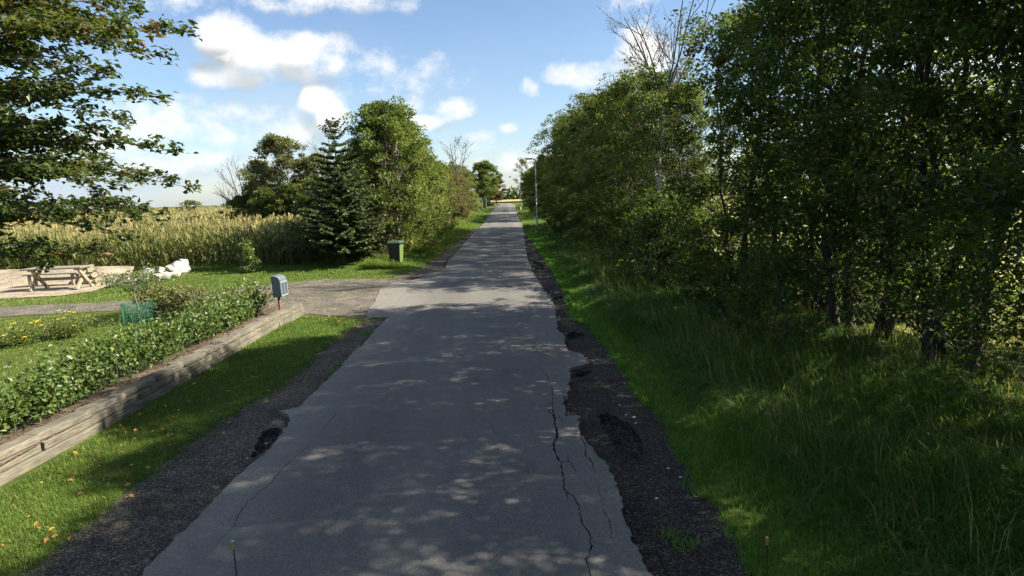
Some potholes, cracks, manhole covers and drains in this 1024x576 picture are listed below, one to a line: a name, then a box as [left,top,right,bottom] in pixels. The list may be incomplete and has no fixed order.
pothole [251,427,282,458]
crack [215,413,337,547]
crack [542,370,612,576]
